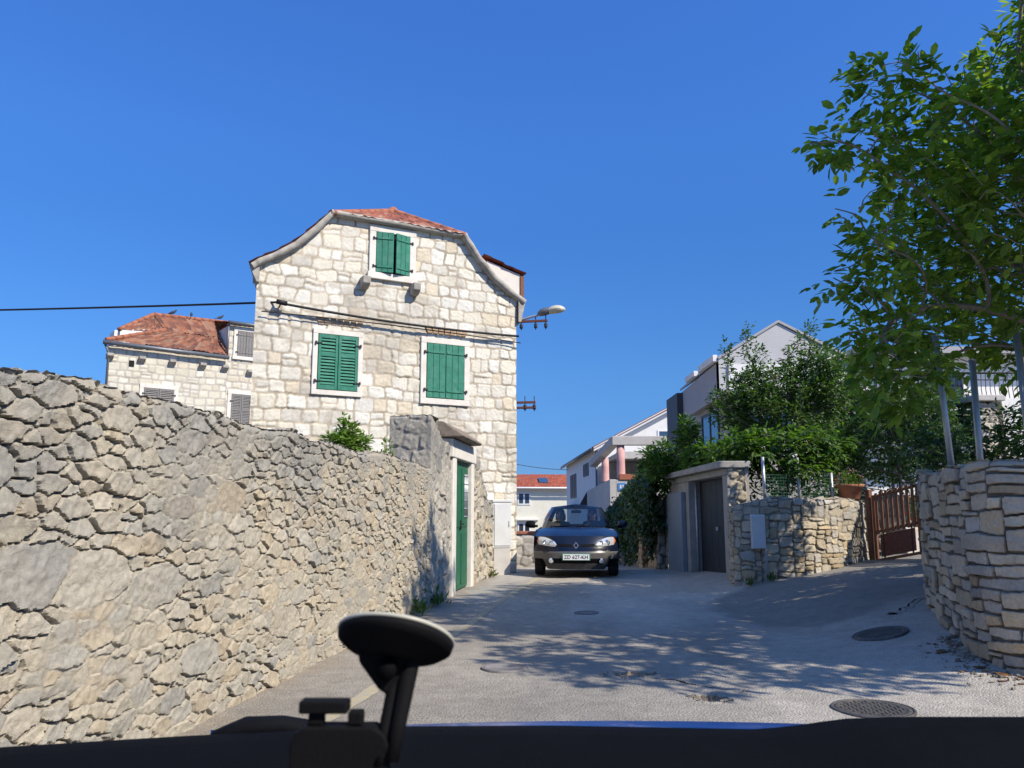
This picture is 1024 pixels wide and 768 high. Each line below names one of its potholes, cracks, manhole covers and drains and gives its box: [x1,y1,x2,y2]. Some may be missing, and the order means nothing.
pothole [597,671,667,679]
manhole cover [852,626,909,641]
manhole cover [481,663,529,673]
manhole cover [830,699,917,718]
pothole [680,693,735,704]
crack [888,597,925,615]
